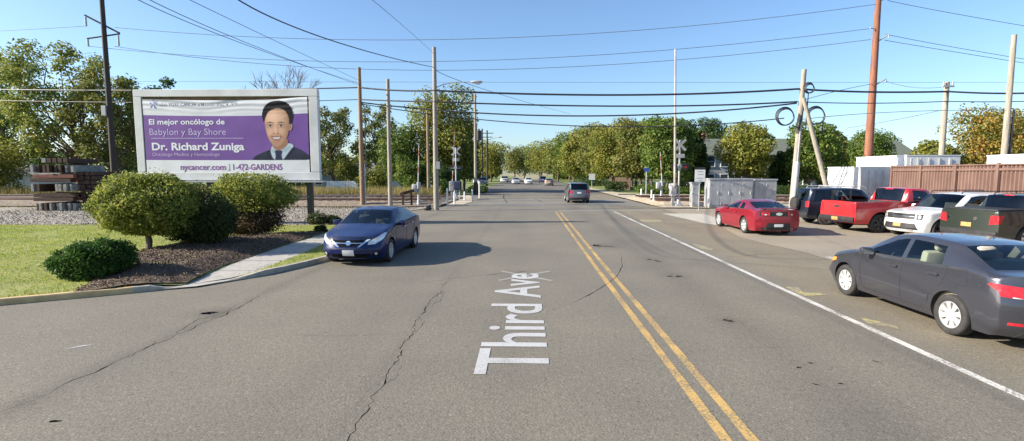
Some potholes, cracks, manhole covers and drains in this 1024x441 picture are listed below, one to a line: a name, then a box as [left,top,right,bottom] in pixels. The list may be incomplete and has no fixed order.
crack [347,269,553,441]
